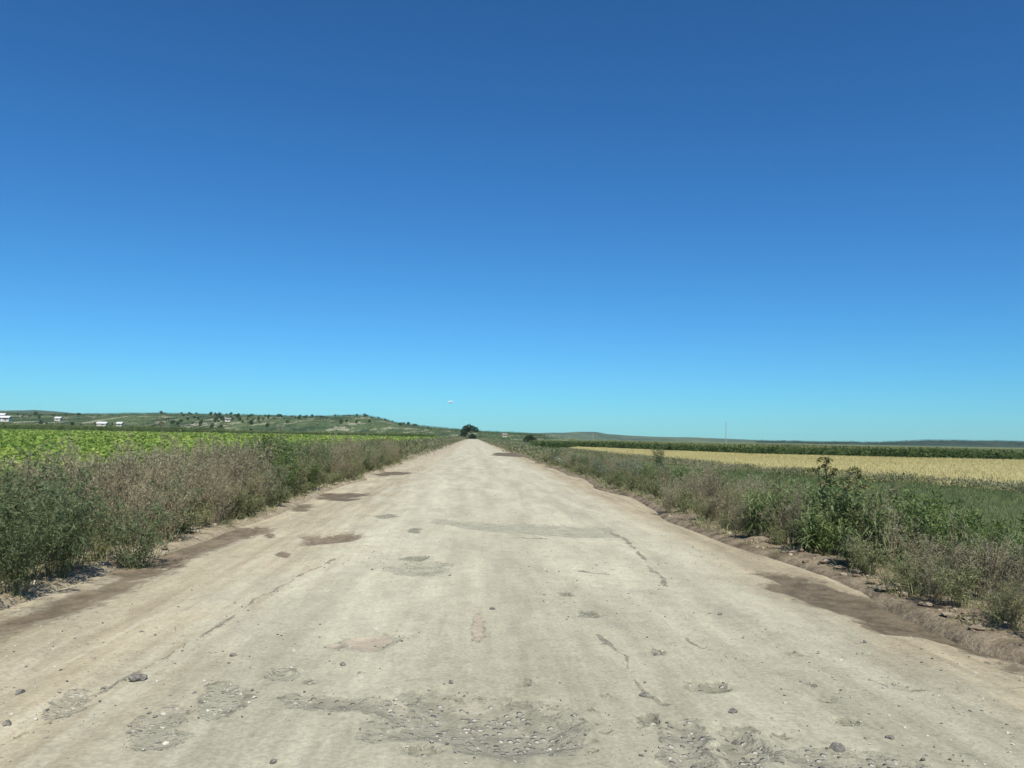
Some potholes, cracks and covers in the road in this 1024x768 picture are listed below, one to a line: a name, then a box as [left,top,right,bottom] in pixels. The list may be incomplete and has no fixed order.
crack [0,558,336,747]
crack [427,519,669,587]
